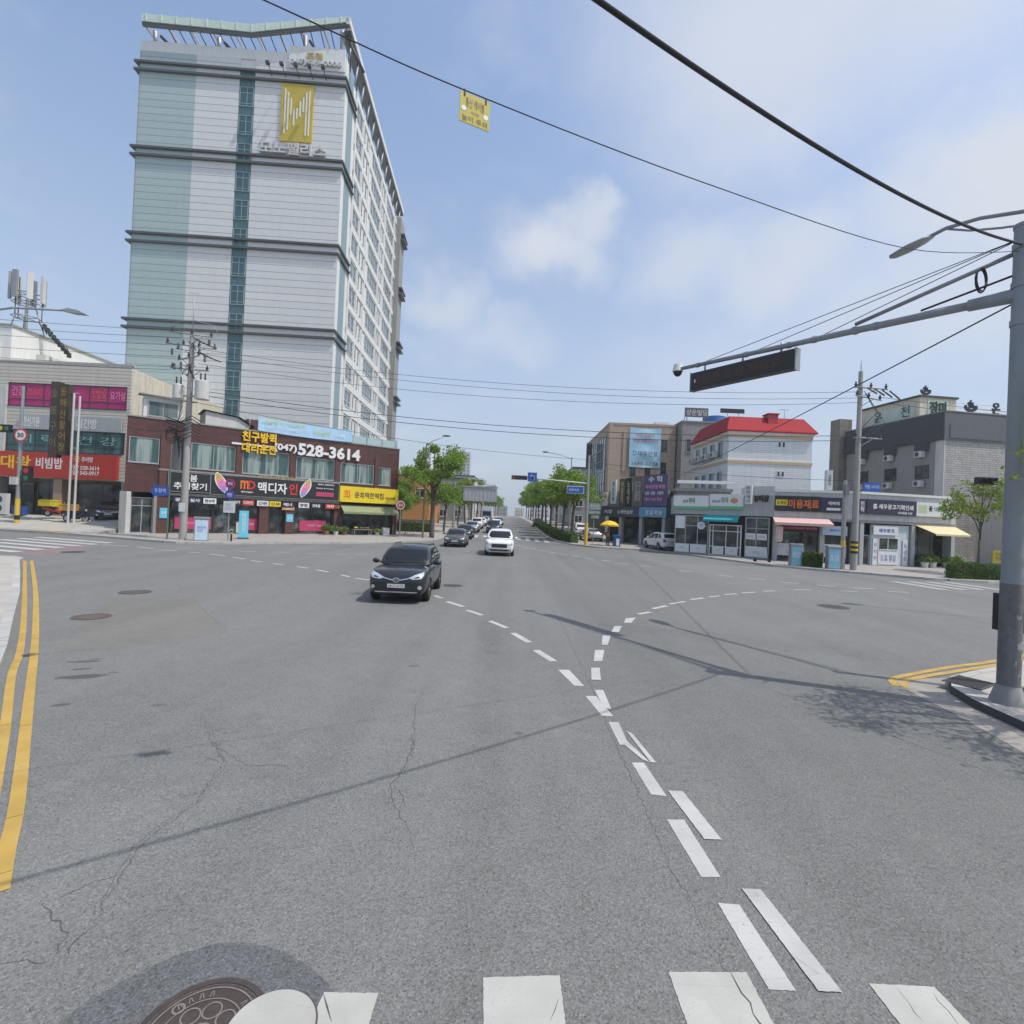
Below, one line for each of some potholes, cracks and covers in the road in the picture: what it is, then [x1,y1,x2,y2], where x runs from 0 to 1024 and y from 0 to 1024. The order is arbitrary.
crack [386,689,424,849]
crack [730,971,761,1024]
manhole cover [140,977,264,1024]
crack [4,717,295,964]
drain grate [942,675,995,690]
